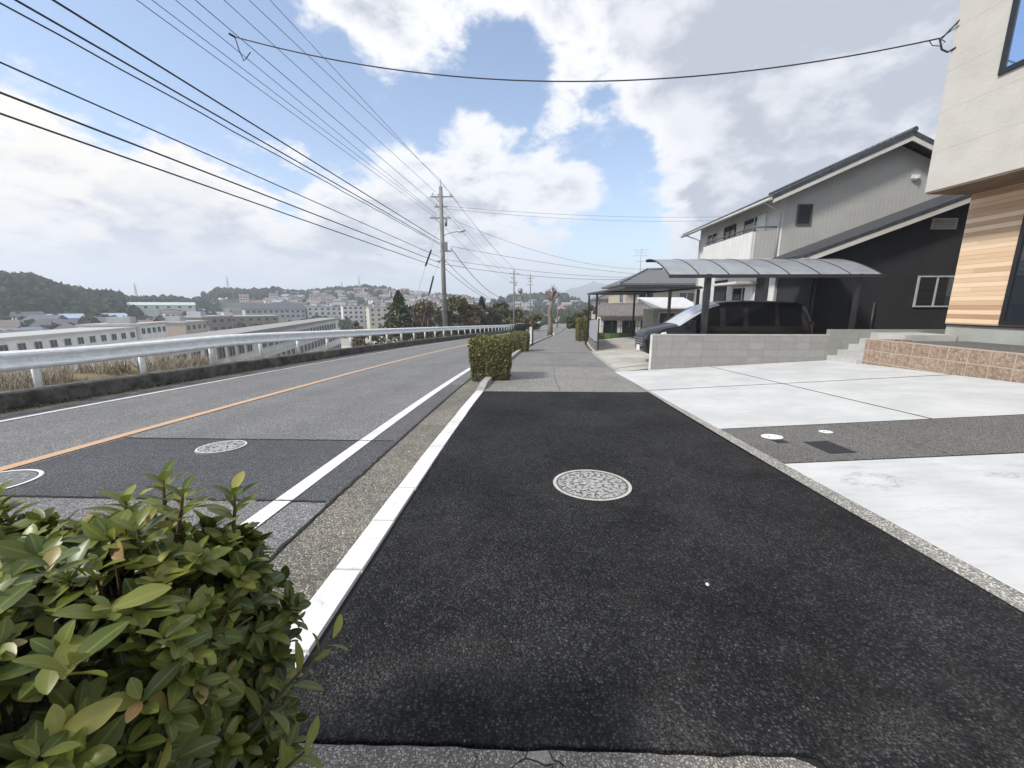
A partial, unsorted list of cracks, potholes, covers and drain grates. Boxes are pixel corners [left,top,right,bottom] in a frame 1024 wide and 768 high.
manhole cover [0,469,45,491]
manhole cover [553,470,632,501]
crack [512,746,566,768]
manhole cover [195,440,248,454]
